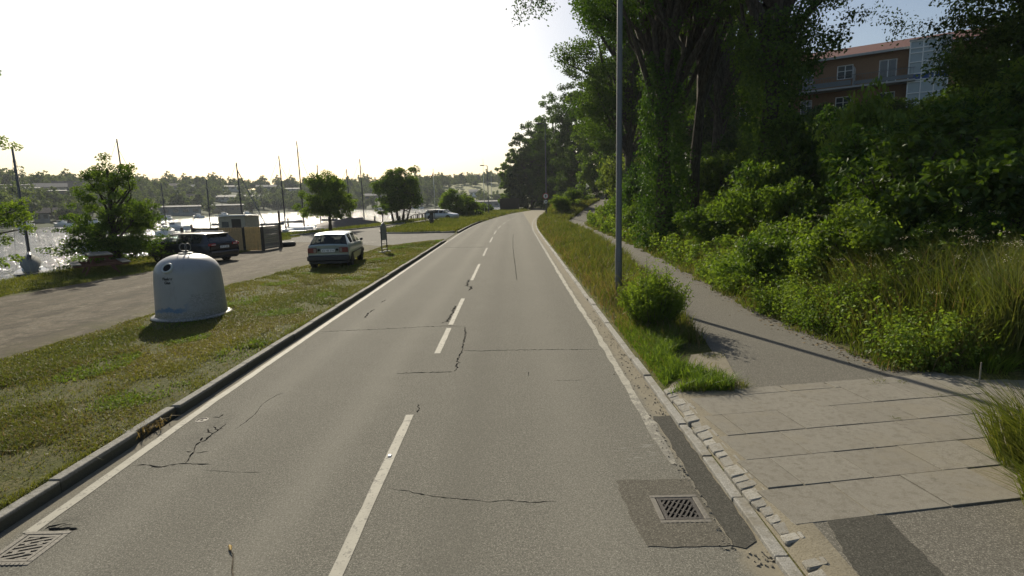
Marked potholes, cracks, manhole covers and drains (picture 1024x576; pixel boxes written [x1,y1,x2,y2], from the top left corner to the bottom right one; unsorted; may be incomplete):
crack [134,393,282,473]
crack [390,488,555,503]
drain grate [0,531,72,566]
crack [323,280,597,374]
drain grate [649,494,712,523]
